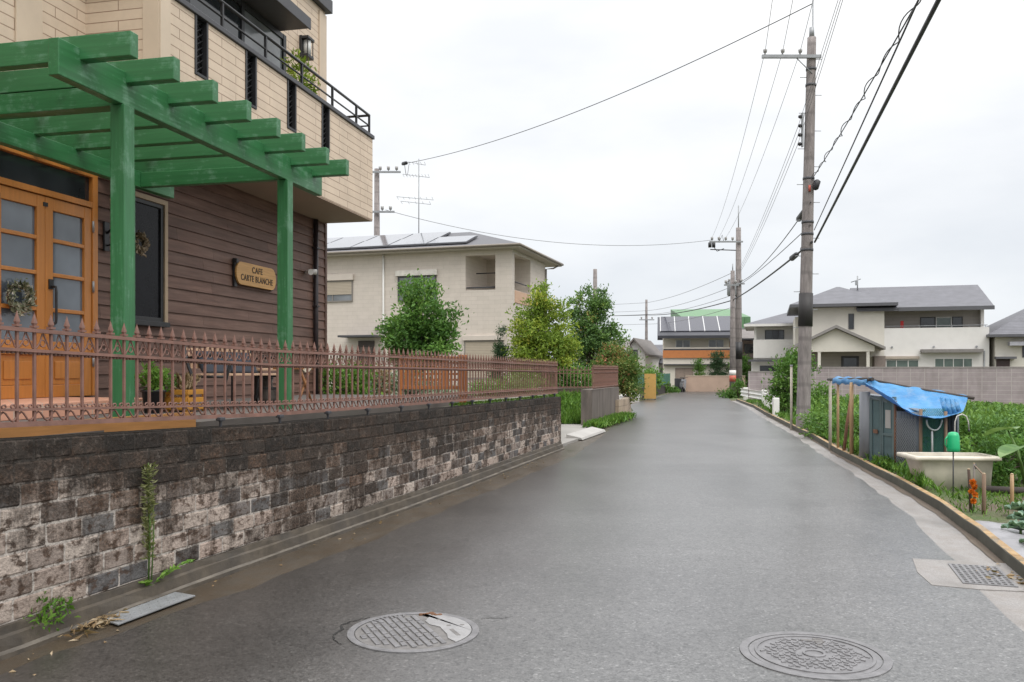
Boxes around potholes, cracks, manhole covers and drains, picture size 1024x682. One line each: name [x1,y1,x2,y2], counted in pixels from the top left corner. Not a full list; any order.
manhole cover [347,612,479,653]
crack [332,617,370,644]
drain grate [948,563,1019,588]
manhole cover [739,631,893,680]
